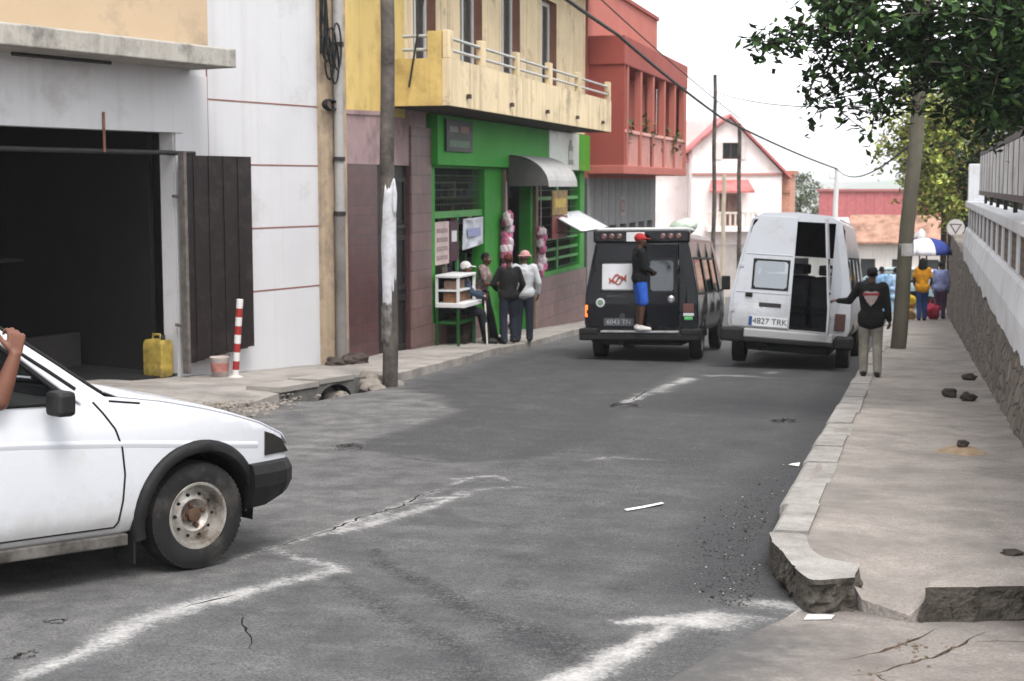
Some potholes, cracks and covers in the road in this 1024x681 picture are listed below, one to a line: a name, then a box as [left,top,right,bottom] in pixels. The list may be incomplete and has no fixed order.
crack [229,480,493,559]
pothole [609,401,642,409]
pothole [6,647,39,660]
pothole [43,616,68,624]
crack [186,592,255,652]
pothole [331,442,366,450]
